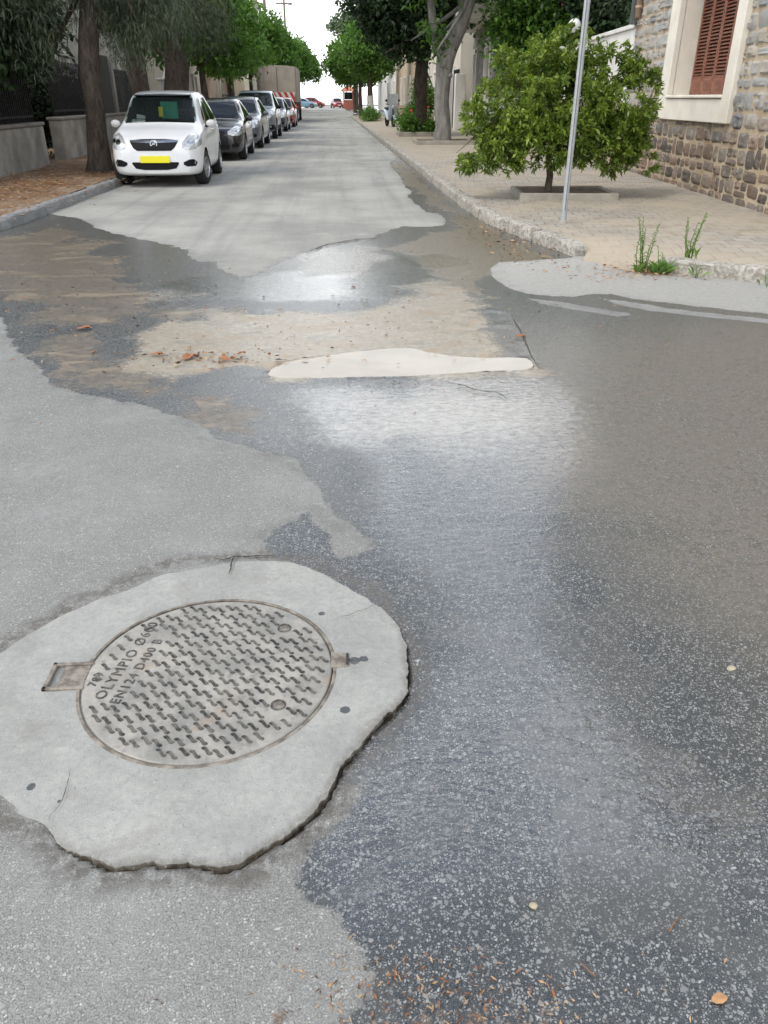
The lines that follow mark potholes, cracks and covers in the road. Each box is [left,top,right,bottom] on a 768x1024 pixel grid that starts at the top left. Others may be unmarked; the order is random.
manhole cover [41,599,349,769]
